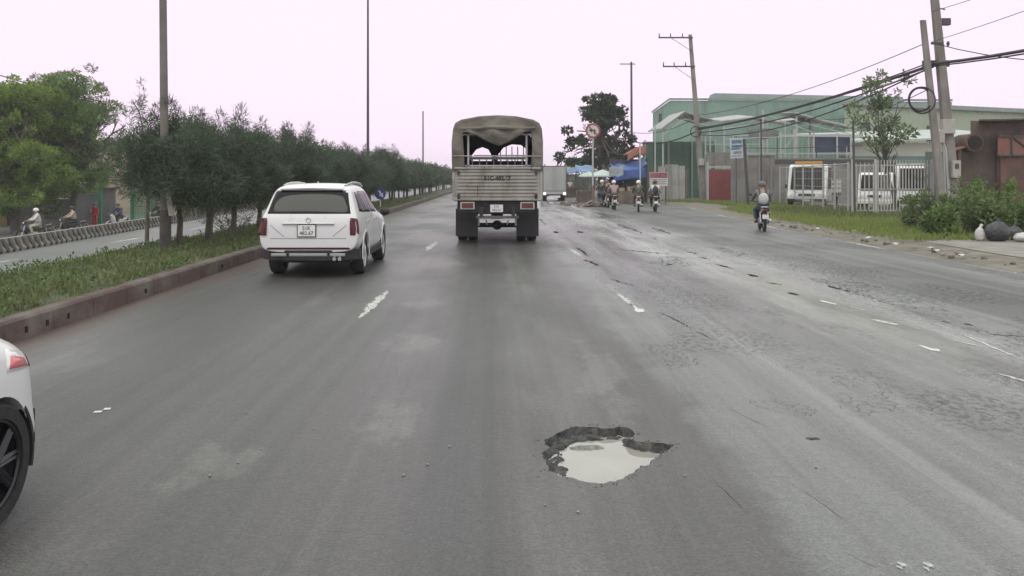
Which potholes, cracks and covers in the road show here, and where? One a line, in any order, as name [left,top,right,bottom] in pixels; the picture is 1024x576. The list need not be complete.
pothole [532,420,680,488]
crack [642,313,712,369]
crack [739,398,817,424]
